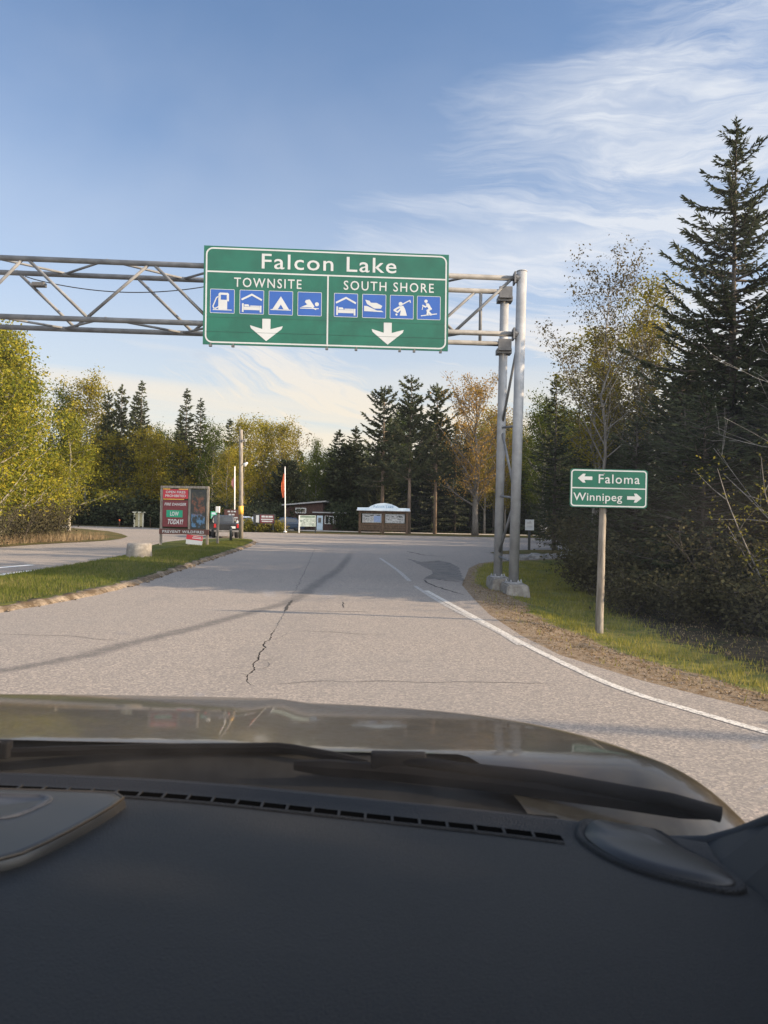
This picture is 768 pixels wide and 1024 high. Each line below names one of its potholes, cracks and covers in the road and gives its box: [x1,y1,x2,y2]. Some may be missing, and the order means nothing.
crack [242,552,550,685]
